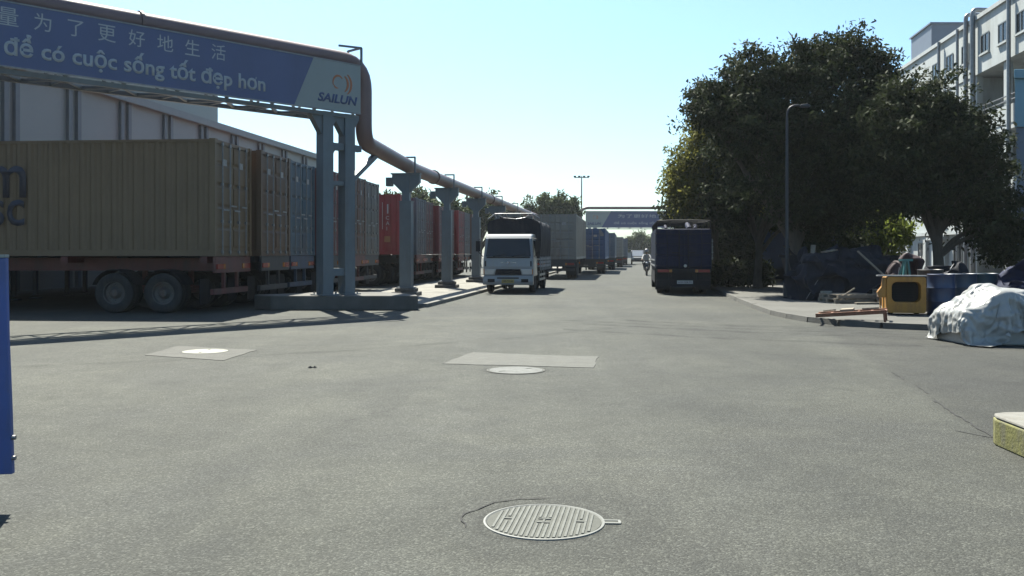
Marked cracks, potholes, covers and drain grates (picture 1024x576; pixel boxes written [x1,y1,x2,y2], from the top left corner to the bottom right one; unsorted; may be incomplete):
manhole cover [487,366,545,374]
crack [460,498,538,527]
manhole cover [483,504,621,541]
